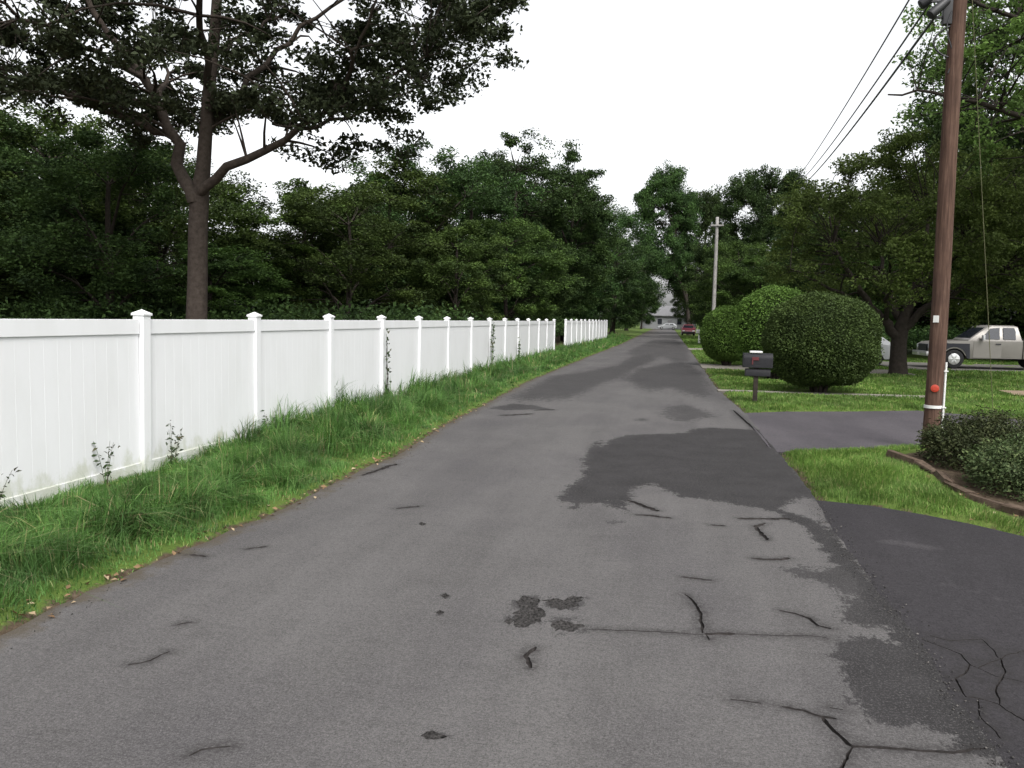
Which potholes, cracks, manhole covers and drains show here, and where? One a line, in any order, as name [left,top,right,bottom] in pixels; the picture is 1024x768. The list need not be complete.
crack [189,746,230,756]
crack [782,635,1024,768]
crack [713,518,791,540]
pothole [551,619,584,632]
crack [523,647,537,668]
pothole [421,731,447,740]
pothole [512,596,546,628]
crack [362,464,397,476]
pothole [541,596,584,610]
crack [589,577,831,640]
